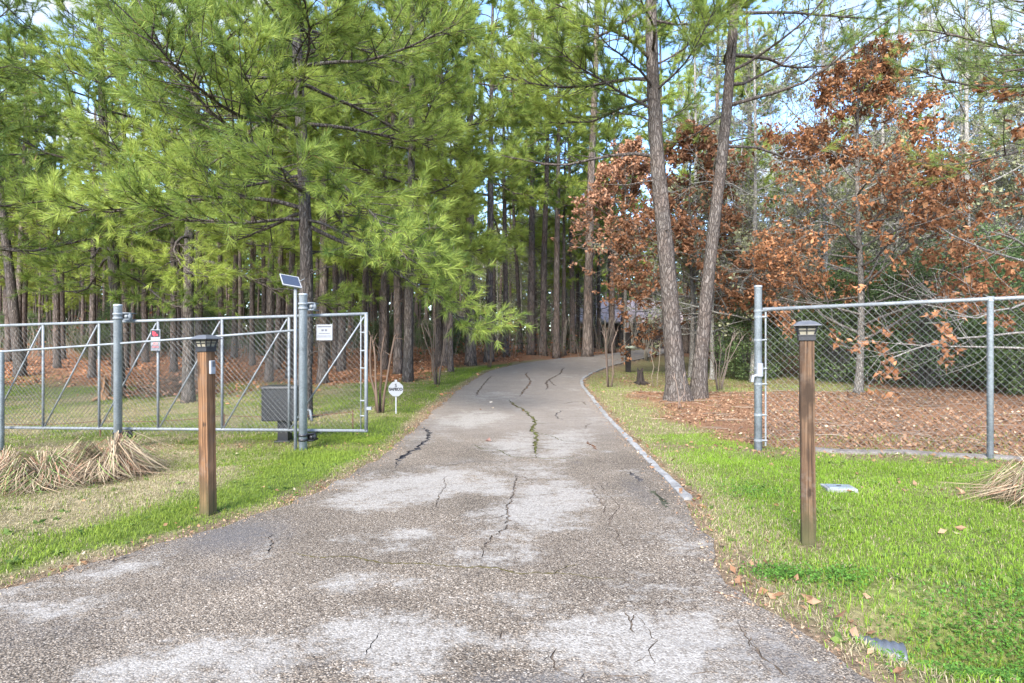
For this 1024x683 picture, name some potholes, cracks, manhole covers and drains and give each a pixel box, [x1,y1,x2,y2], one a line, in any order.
crack [543,612,658,679]
crack [735,621,790,679]
crack [270,368,623,581]
crack [586,472,670,552]
